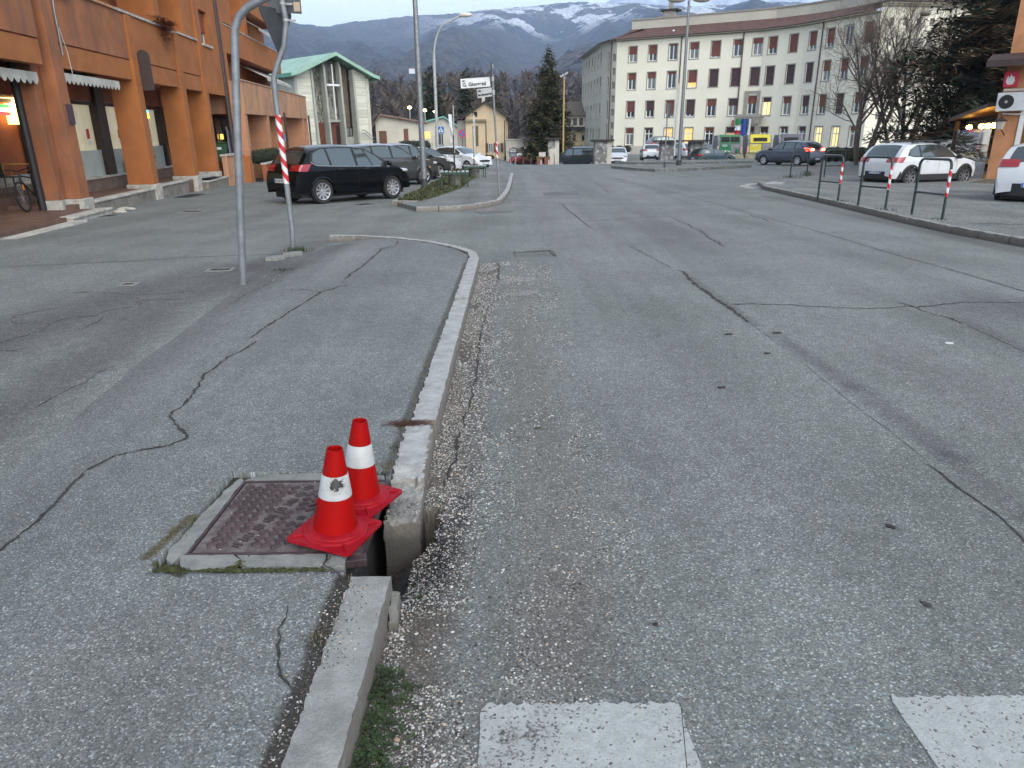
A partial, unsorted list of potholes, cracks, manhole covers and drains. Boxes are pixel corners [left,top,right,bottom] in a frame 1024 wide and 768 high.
crack [0,284,353,550]
crack [443,305,490,491]
crack [268,555,344,759]
crack [630,246,1017,323]
manhole cover [186,479,389,560]
